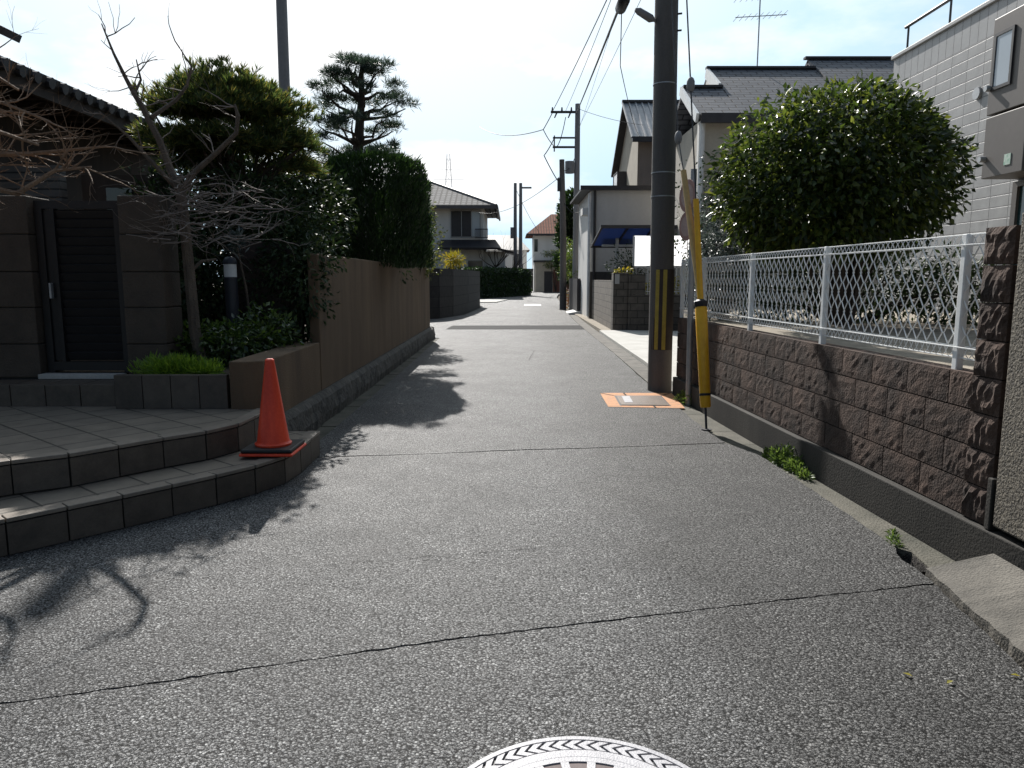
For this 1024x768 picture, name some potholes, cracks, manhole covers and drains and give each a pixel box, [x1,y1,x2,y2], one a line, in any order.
manhole cover [600,393,684,408]
manhole cover [468,736,690,768]
